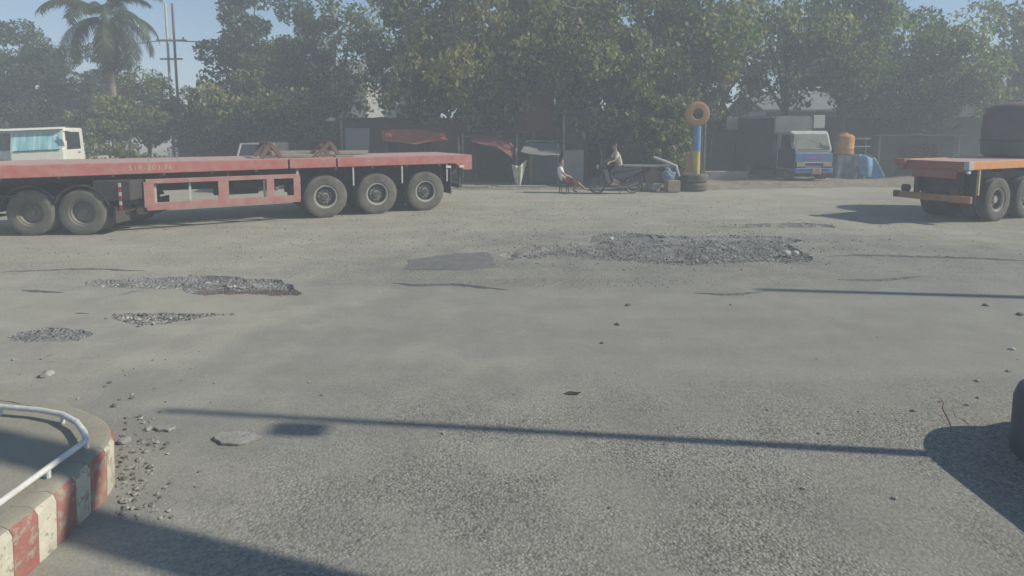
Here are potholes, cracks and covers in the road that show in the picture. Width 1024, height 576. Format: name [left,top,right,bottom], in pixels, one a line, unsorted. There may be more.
pothole [78,275,301,296]
pothole [7,327,93,343]
pothole [105,312,230,326]
pothole [498,233,813,265]
